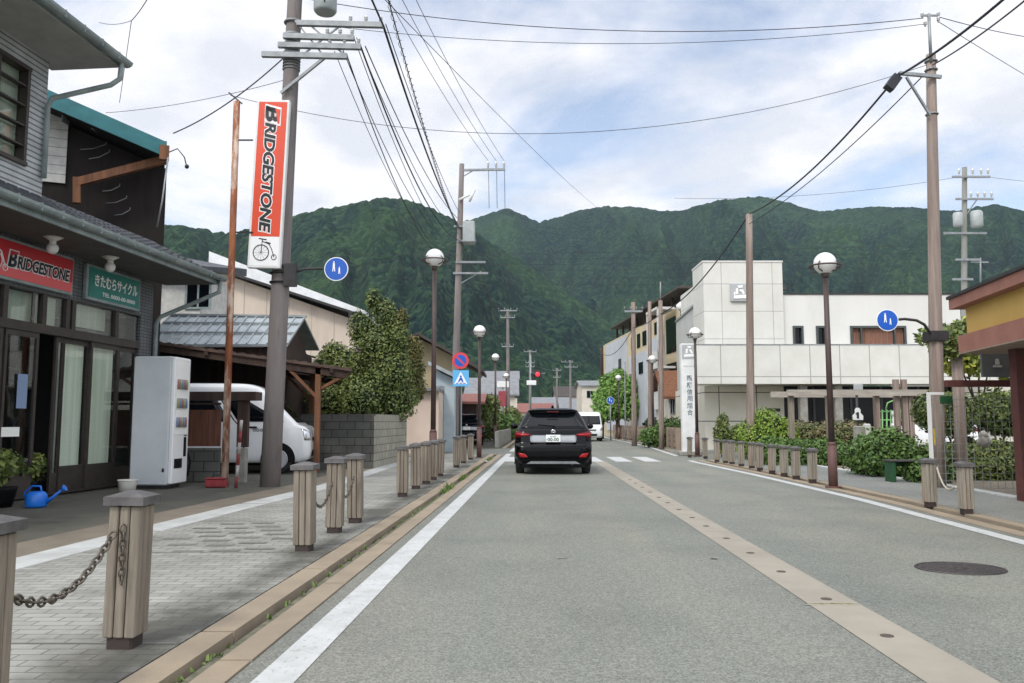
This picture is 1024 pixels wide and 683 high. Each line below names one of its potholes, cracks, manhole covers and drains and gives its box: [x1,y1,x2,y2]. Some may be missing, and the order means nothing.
manhole cover [914,561,1008,576]
